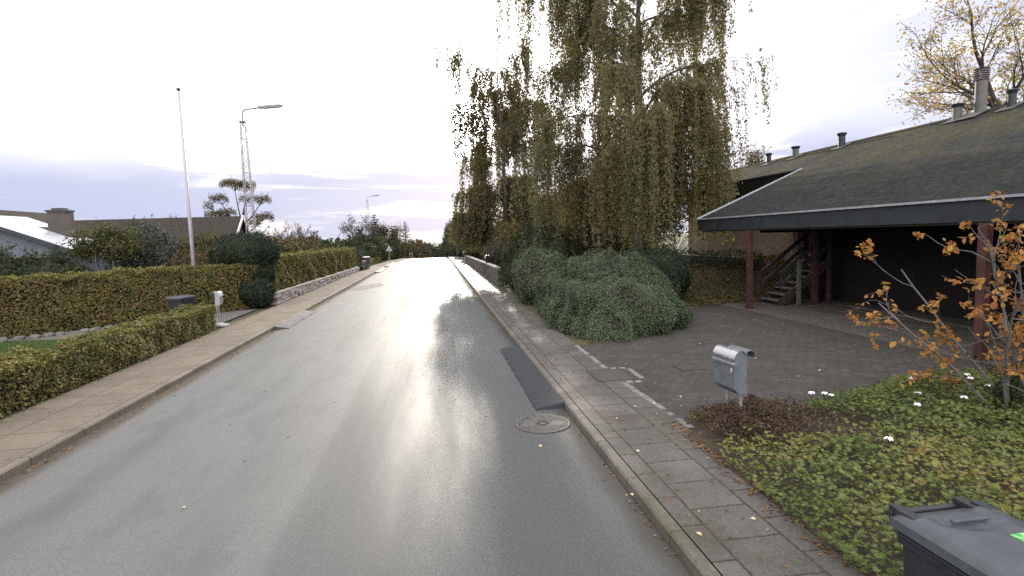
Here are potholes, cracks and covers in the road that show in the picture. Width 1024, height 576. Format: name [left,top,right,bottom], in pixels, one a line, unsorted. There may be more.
manhole cover [515,414,571,433]
